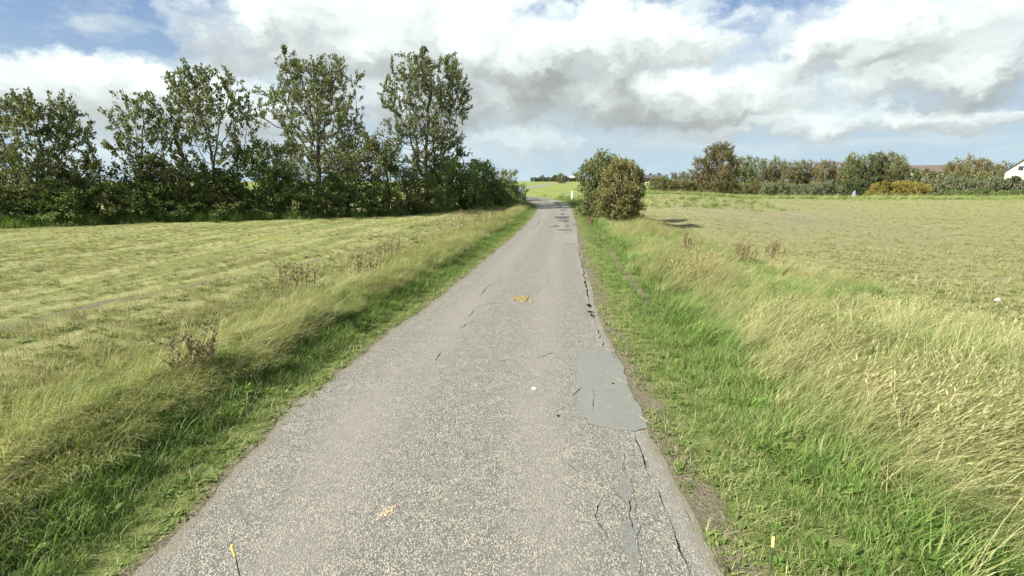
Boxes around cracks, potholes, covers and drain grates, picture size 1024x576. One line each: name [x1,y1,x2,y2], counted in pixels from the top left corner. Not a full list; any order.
crack [578,251,615,358]
